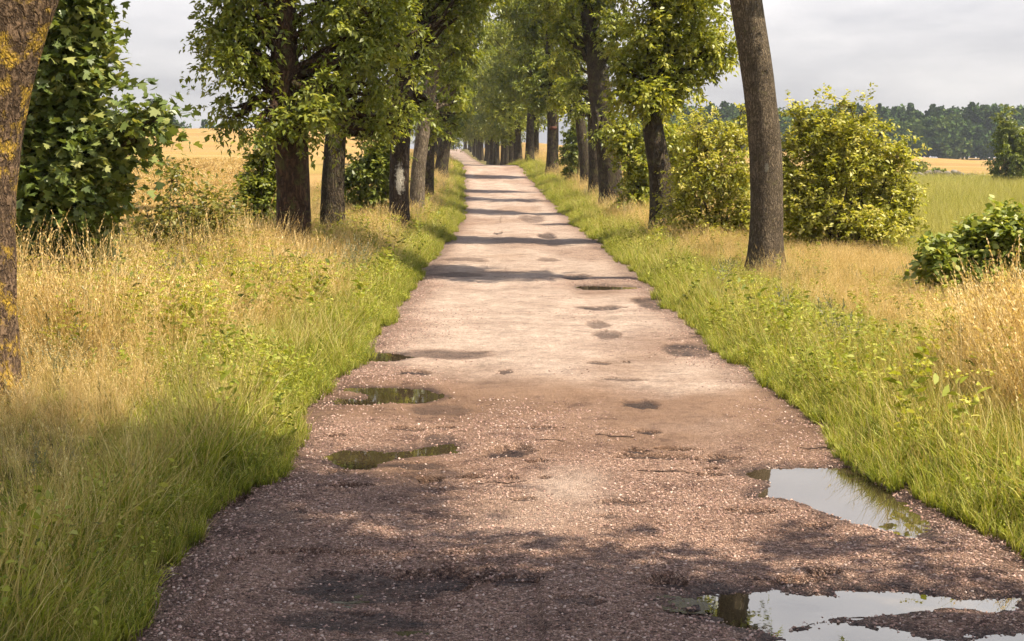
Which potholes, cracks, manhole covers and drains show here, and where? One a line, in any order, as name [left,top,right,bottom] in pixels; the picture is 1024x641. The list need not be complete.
pothole [591,329,623,340]
pothole [617,398,663,410]
pothole [482,443,540,458]
pothole [584,320,613,329]
